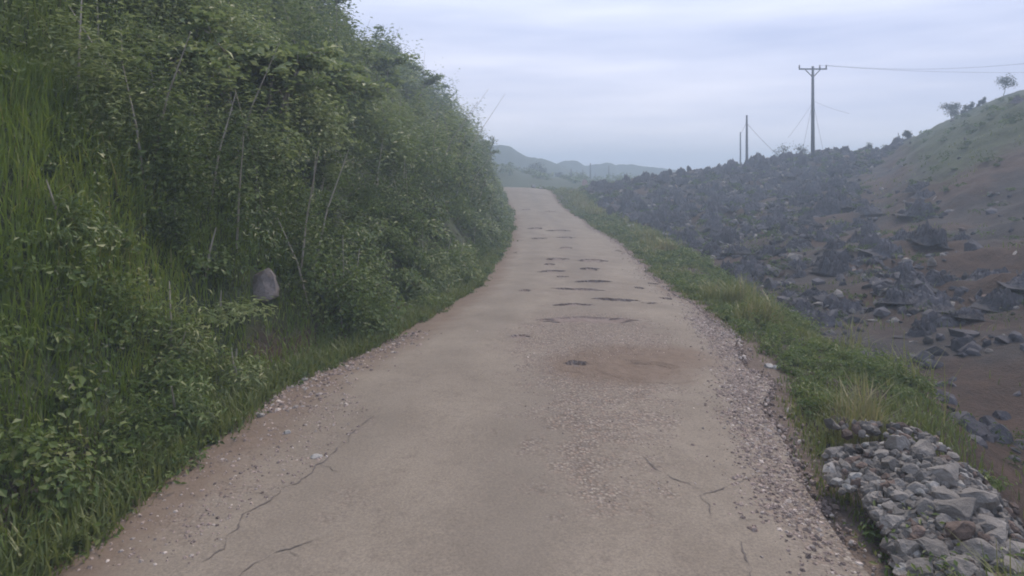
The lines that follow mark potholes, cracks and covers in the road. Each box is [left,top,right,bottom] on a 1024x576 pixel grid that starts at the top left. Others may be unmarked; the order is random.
crack [240,540,313,575]
pothole [581,296,651,304]
pothole [520,314,649,326]
crack [645,457,750,517]
crack [204,415,375,561]
